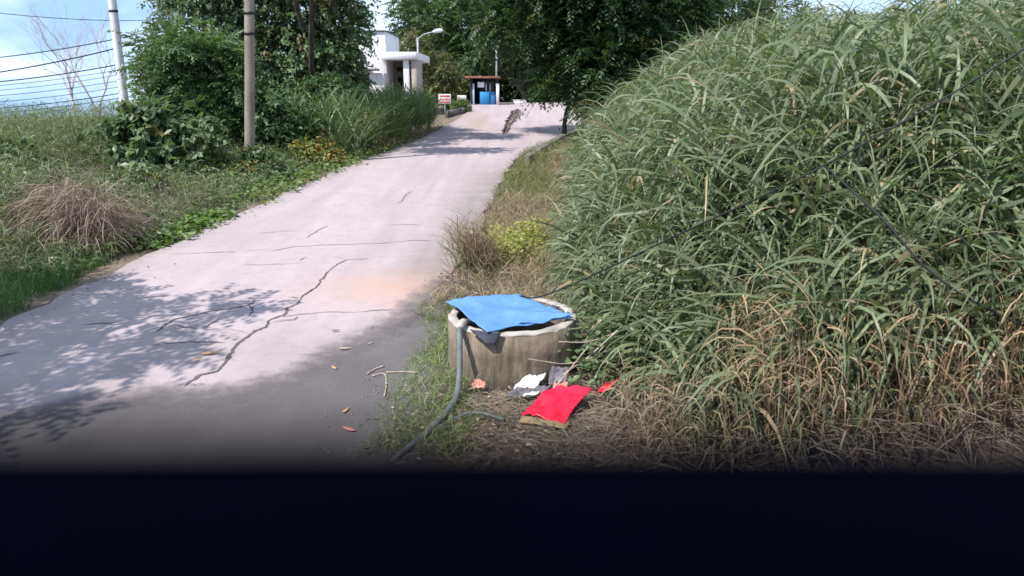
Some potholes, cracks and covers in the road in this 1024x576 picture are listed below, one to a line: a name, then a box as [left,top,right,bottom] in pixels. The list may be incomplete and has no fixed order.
crack [155,224,428,386]
